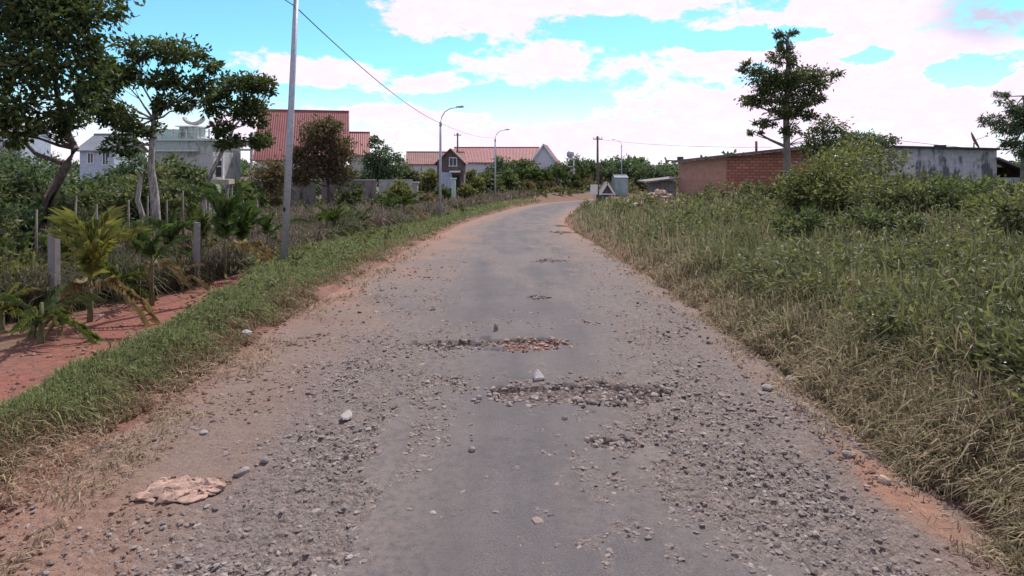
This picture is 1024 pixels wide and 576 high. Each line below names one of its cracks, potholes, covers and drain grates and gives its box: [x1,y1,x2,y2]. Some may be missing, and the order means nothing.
pothole [471,381,680,407]
pothole [416,338,486,352]
pothole [487,336,573,353]
